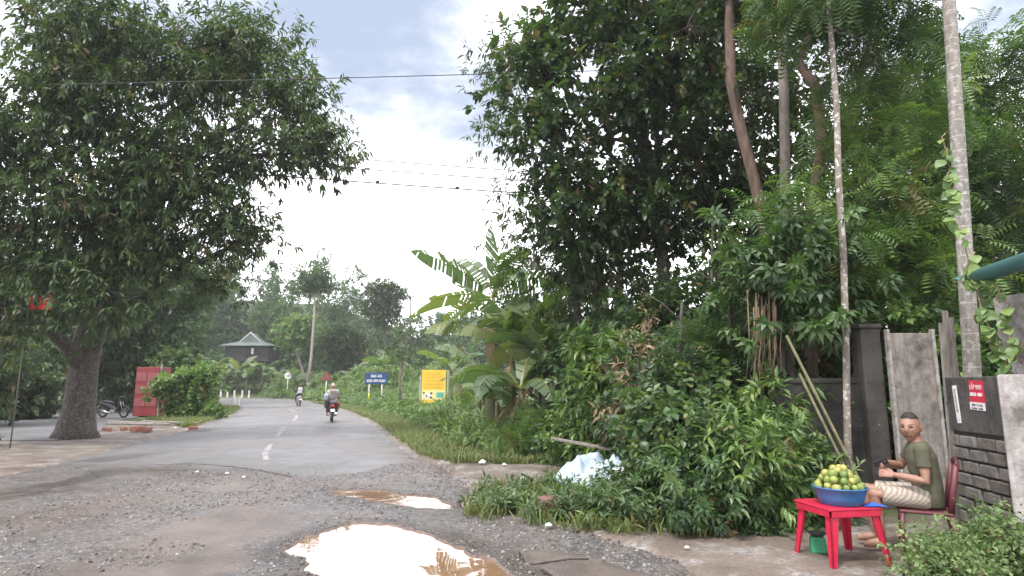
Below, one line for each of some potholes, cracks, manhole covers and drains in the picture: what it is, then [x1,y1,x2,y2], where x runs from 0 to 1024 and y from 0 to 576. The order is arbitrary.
pothole [325,489,456,509]
pothole [279,521,516,576]
